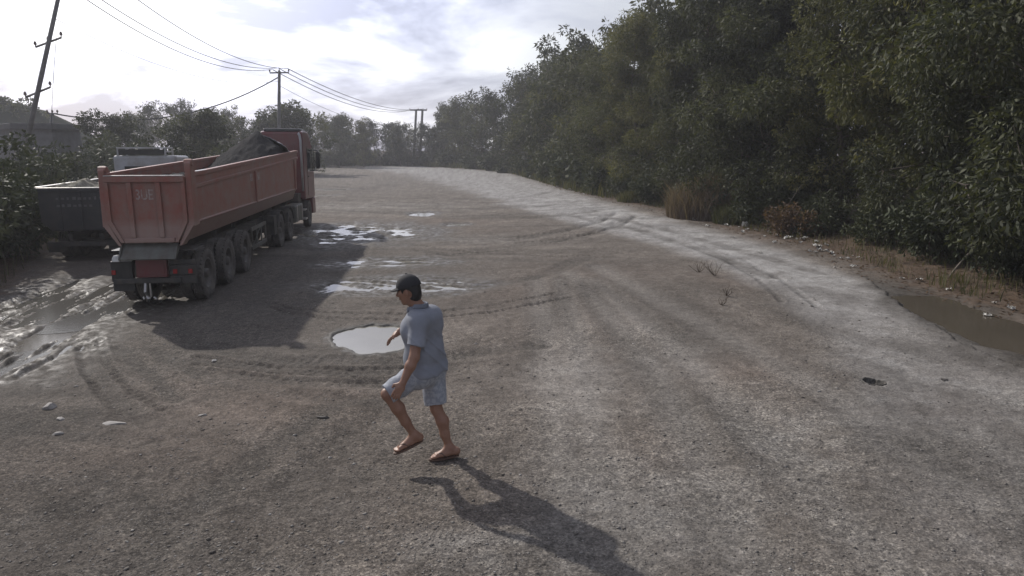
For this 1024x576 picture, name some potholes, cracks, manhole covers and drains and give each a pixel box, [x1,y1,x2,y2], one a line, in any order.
pothole [327,323,405,356]
